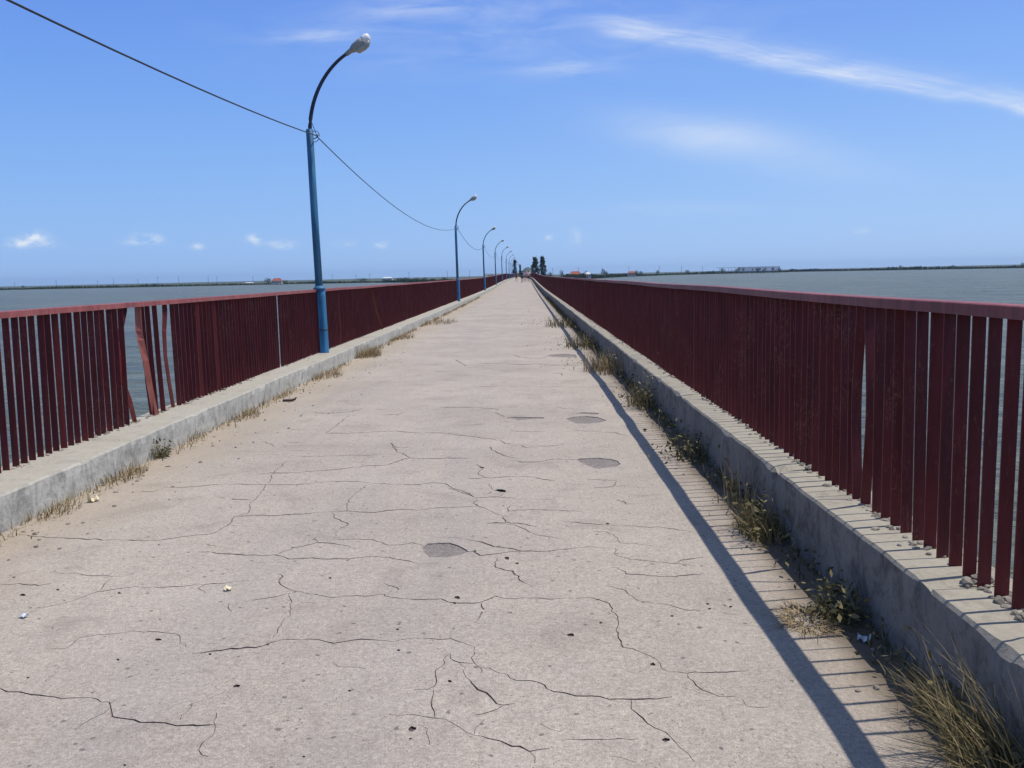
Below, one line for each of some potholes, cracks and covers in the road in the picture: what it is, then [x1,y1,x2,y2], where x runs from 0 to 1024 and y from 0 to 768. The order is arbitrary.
crack [27,407,763,764]
